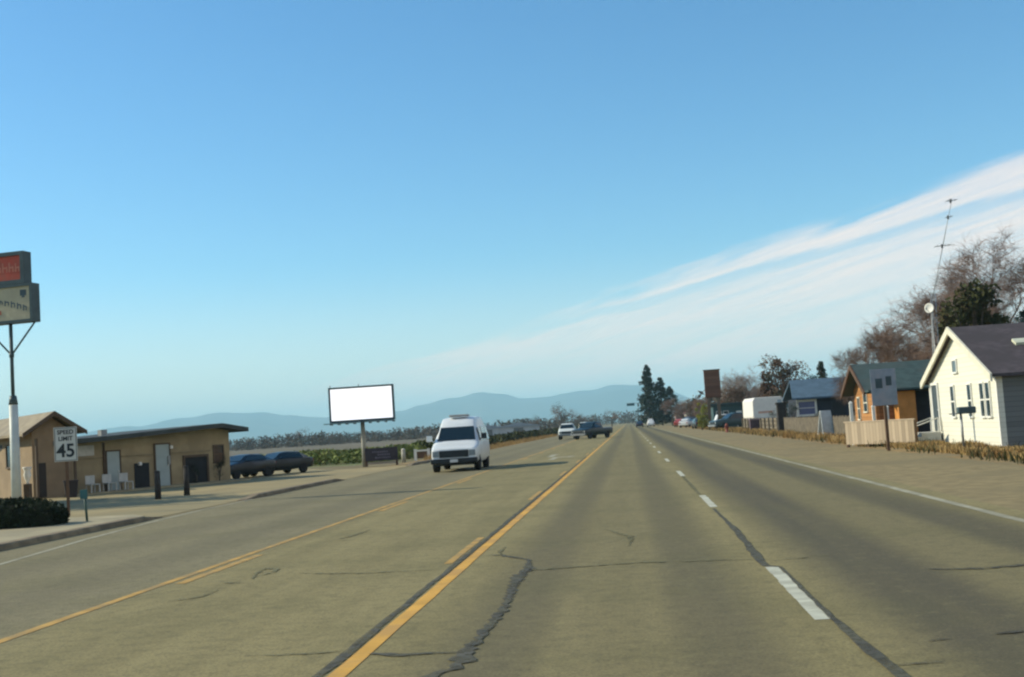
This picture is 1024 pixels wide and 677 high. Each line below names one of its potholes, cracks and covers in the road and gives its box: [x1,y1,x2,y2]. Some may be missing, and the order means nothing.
crack [178,568,280,600]
crack [531,561,666,570]
crack [603,529,634,544]
